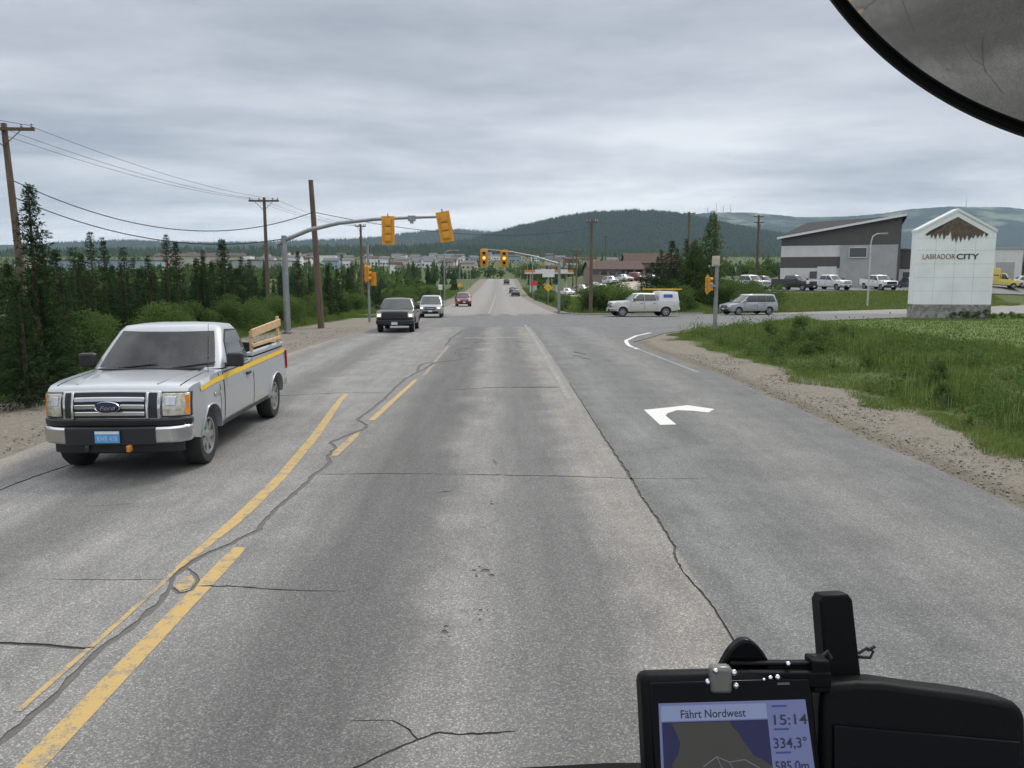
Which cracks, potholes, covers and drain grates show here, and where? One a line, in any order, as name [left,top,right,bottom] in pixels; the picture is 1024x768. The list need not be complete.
crack [0,331,692,768]
